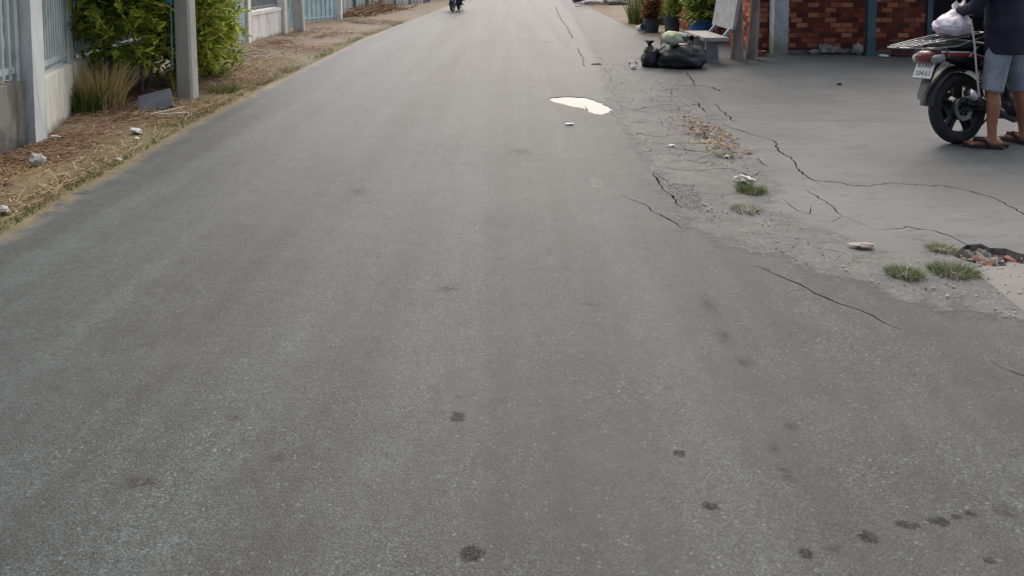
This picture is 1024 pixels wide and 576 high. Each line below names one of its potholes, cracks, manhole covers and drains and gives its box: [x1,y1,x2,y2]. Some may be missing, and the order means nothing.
pothole [953,244,1024,267]
crack [756,266,902,330]
crack [627,72,1024,250]
